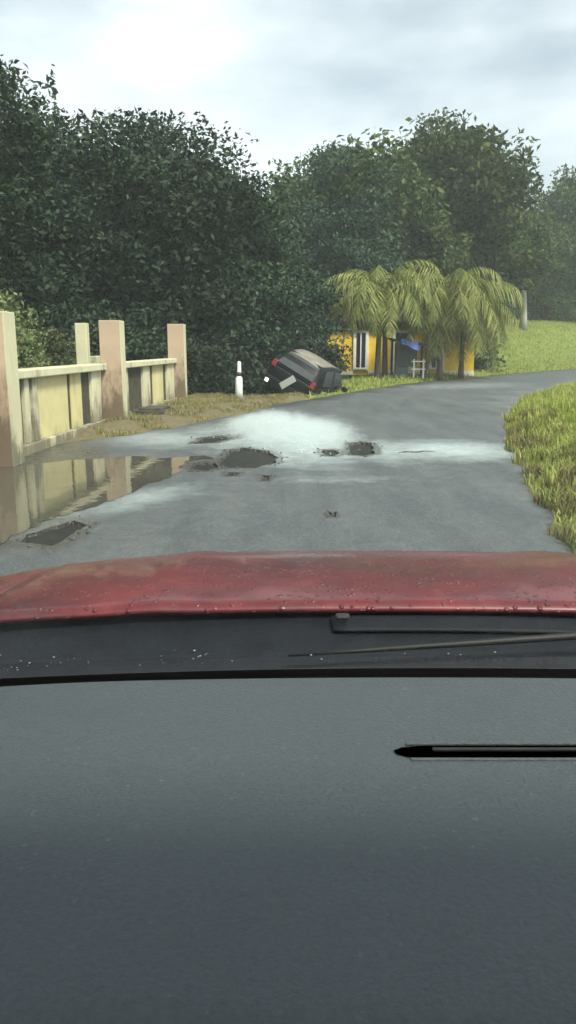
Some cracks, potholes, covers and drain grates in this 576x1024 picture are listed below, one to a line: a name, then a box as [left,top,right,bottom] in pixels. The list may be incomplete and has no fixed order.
pothole [188,461,222,472]
pothole [16,515,97,548]
pothole [212,447,289,470]
pothole [345,440,383,457]
pothole [189,433,244,445]
